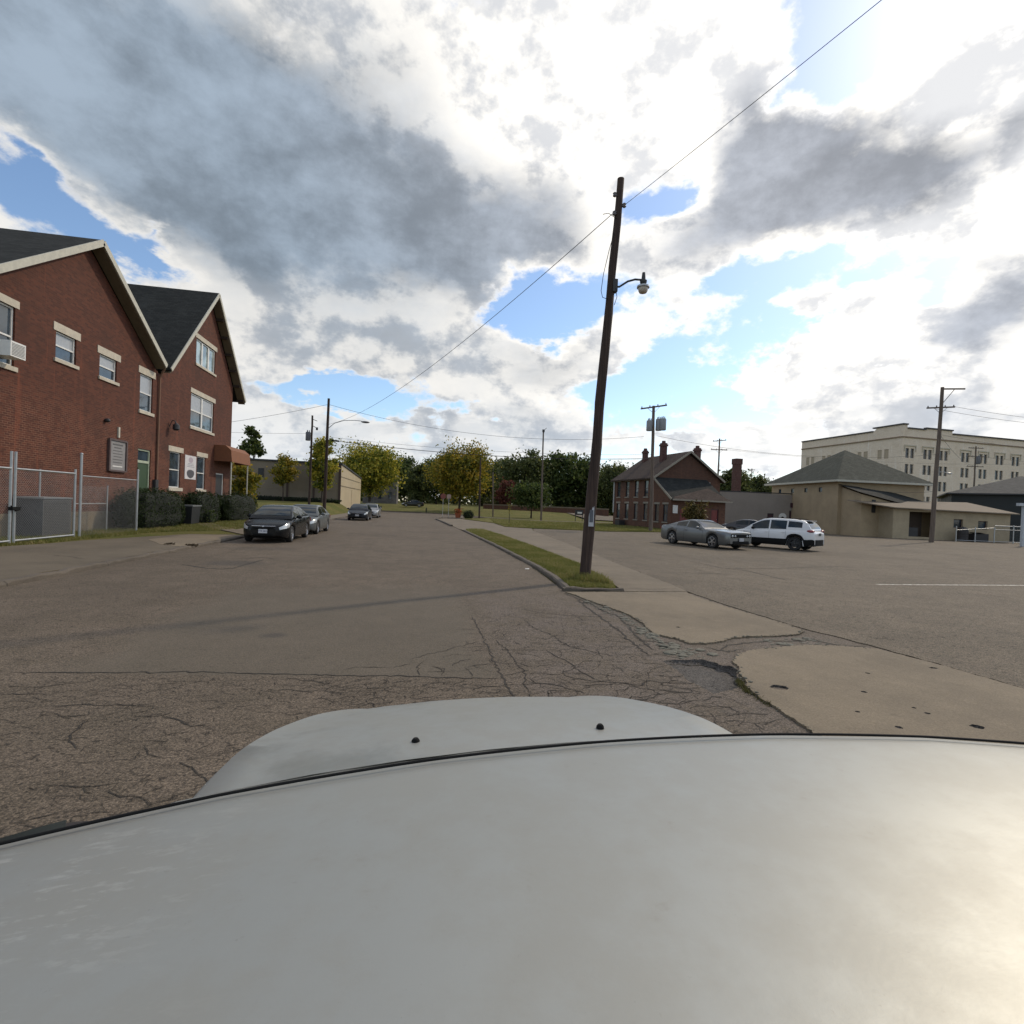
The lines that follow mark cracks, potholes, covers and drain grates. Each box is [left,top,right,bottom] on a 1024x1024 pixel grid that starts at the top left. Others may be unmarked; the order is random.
crack [348,594,803,733]
pothole [663,659,739,694]
crack [705,639,848,652]
crack [0,676,516,829]
